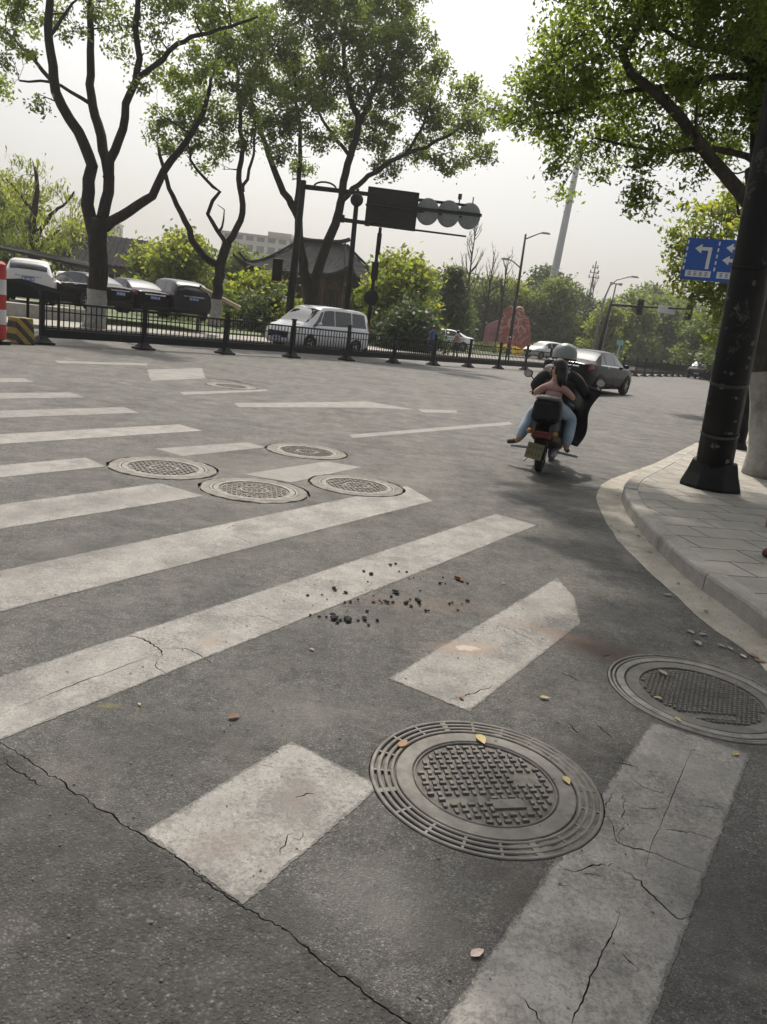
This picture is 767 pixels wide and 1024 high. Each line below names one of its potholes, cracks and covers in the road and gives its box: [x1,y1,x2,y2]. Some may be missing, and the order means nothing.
manhole cover [206,382,256,390]
manhole cover [369,721,604,862]
manhole cover [308,475,405,497]
manhole cover [198,477,310,504]
crack [526,759,709,1023]
crack [0,742,411,1024]
manhole cover [265,443,347,460]
manhole cover [106,456,218,482]
manhole cover [607,654,767,745]
